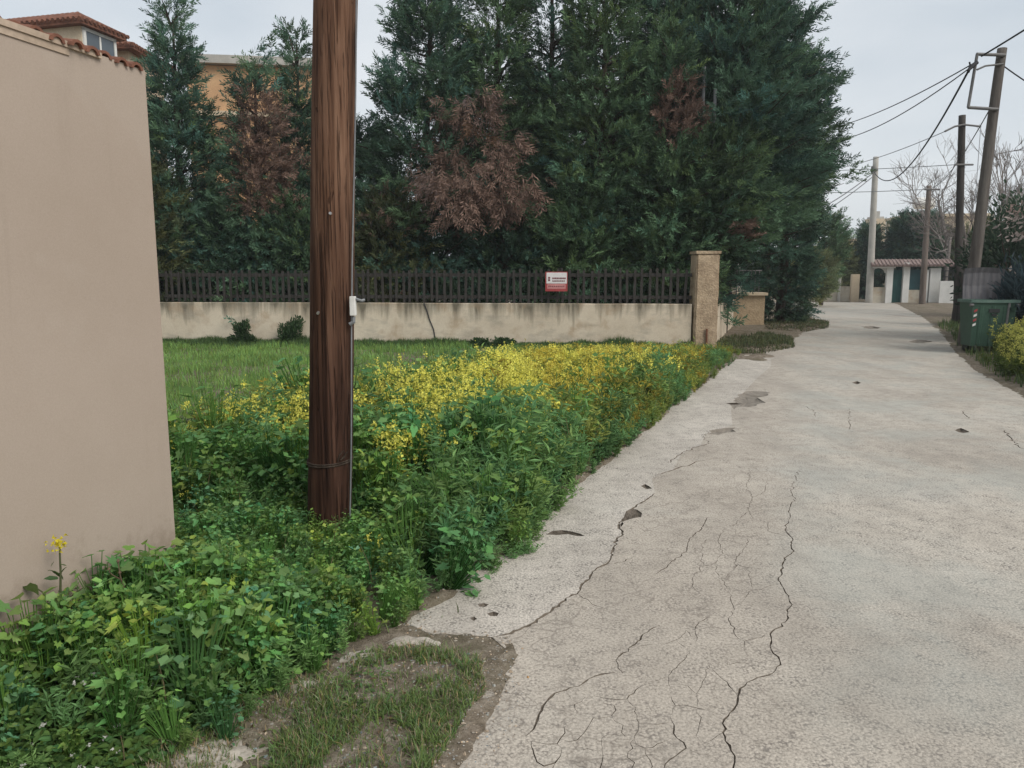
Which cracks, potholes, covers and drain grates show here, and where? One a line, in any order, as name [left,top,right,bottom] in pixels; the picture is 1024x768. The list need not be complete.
pothole [727,391,769,409]
crack [526,469,802,768]
pothole [620,509,642,526]
crack [658,434,709,475]
